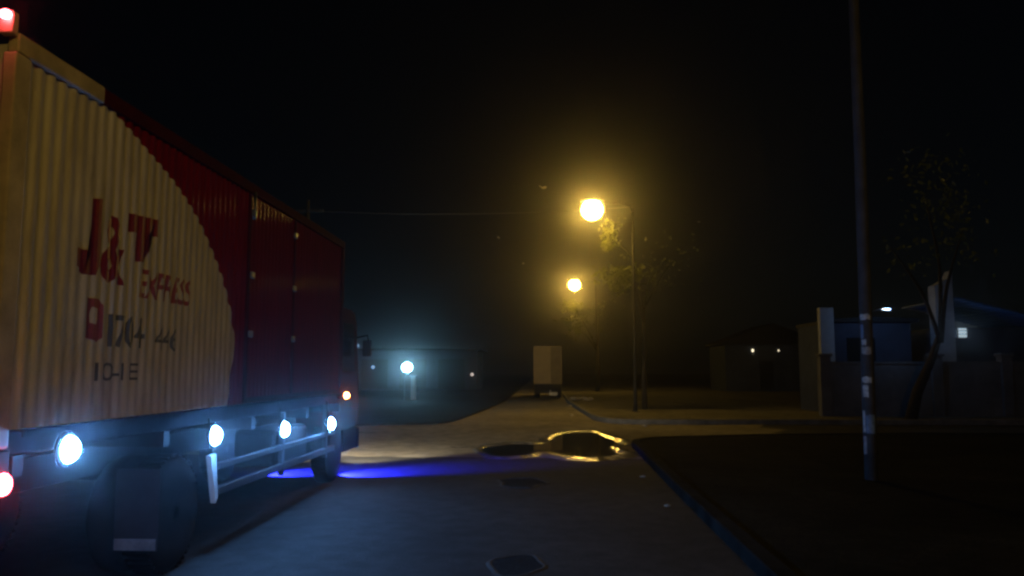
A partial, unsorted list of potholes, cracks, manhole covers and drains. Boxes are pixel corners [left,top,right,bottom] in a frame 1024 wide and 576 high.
pothole [538,430,640,461]
pothole [473,442,550,460]
